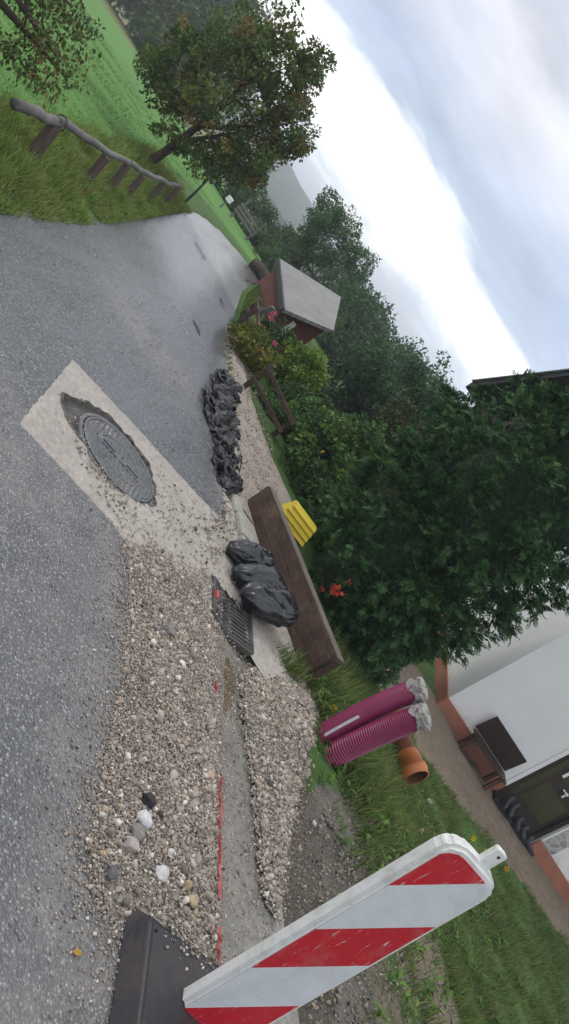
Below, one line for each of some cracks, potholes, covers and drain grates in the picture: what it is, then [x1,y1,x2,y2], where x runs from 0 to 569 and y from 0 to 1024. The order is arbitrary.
manhole cover [75,412,155,506]
drain grate [211,576,254,657]
